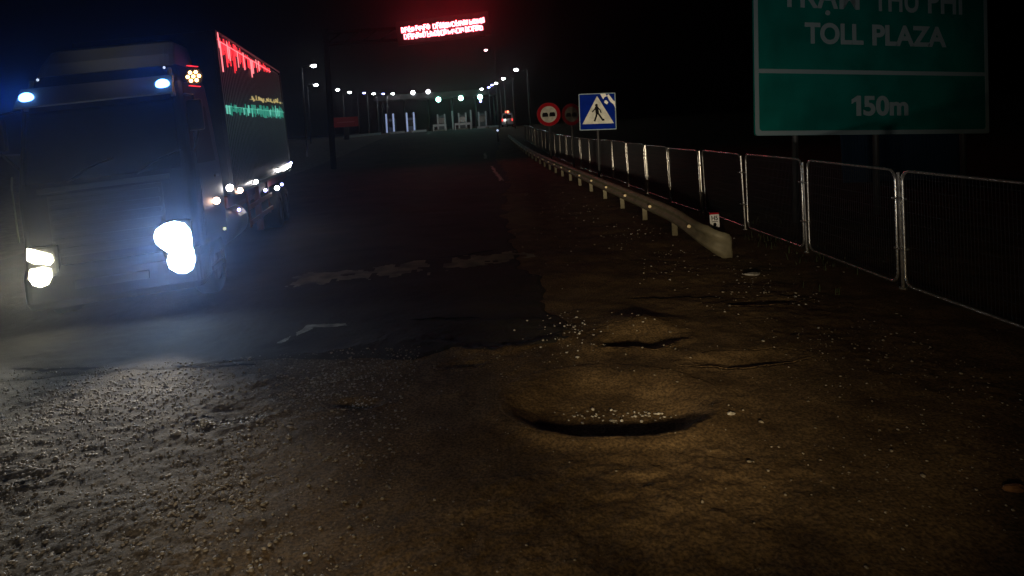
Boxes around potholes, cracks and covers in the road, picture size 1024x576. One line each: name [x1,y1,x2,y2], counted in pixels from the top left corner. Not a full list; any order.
pothole [495,363,725,439]
pothole [586,315,694,350]
pothole [320,394,392,411]
